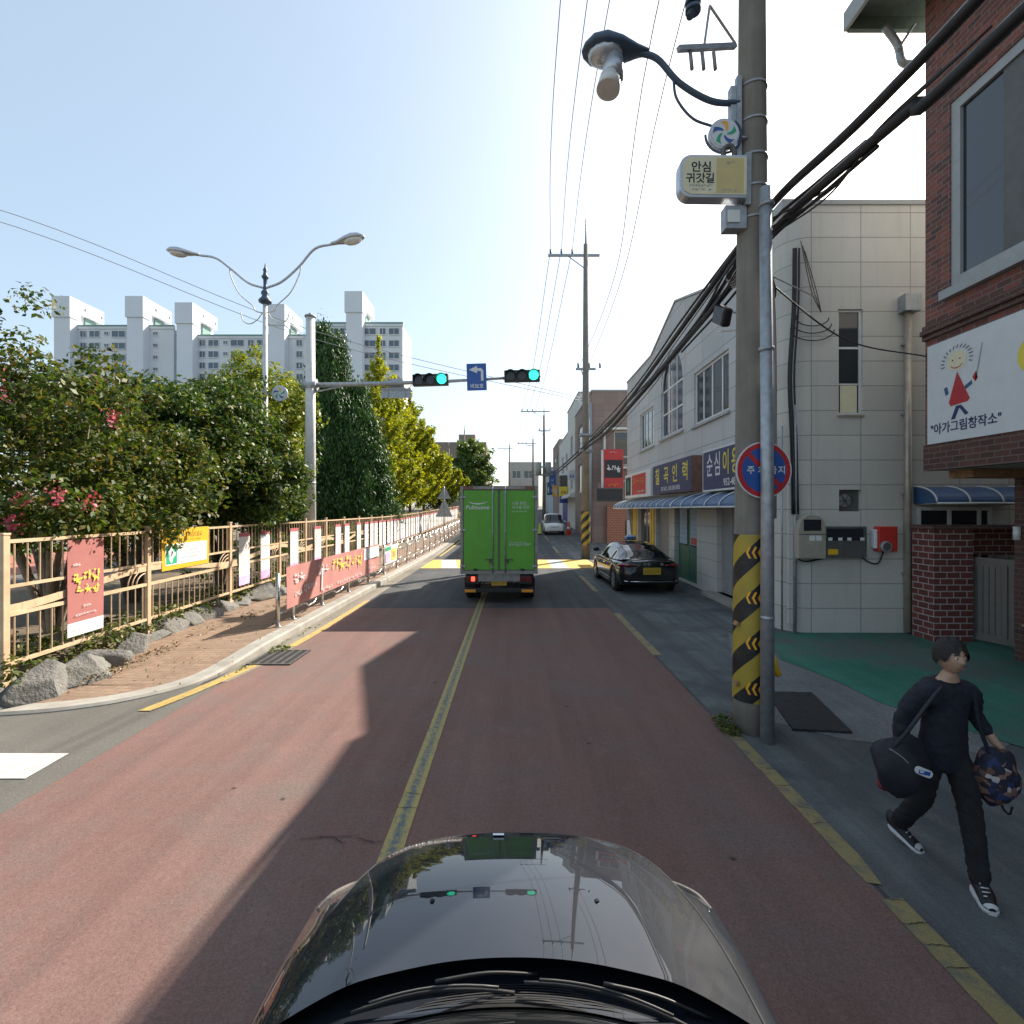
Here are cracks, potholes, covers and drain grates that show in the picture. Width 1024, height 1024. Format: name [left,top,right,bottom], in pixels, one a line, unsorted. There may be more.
drain grate [245,650,311,665]
manhole cover [775,691,852,733]
crack [306,834,383,843]
